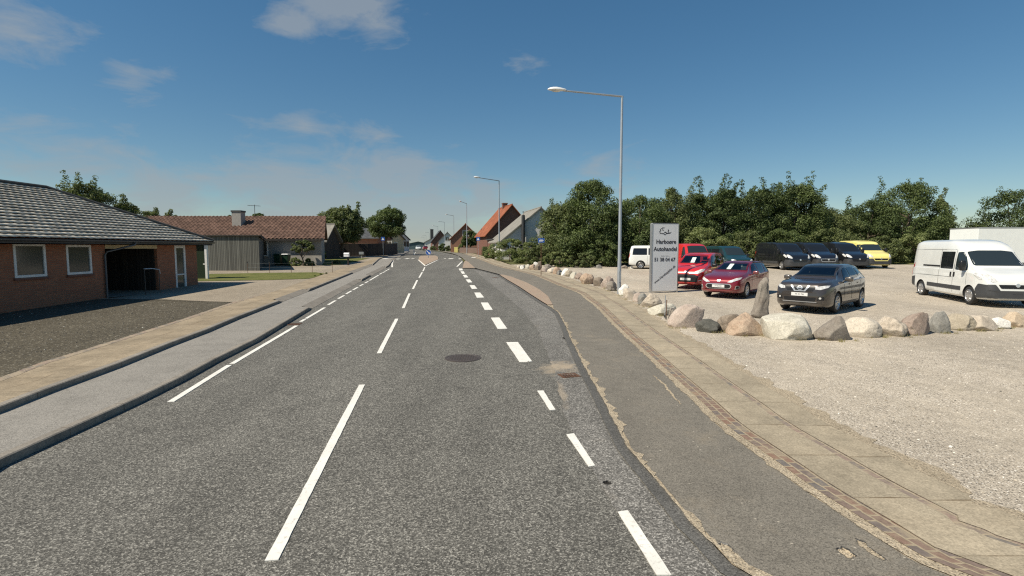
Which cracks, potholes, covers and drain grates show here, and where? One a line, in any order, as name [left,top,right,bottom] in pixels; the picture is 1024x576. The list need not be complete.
manhole cover [445,354,481,362]
pothole [836,546,857,559]
